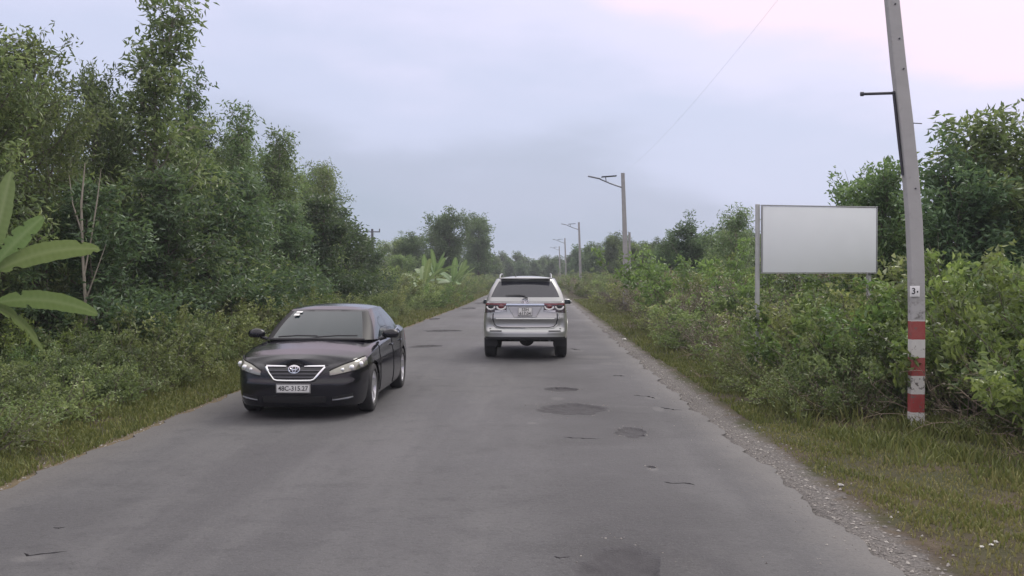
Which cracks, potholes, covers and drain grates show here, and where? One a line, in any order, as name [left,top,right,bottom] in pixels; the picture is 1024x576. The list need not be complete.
pothole [535,403,609,415]
pothole [613,427,647,438]
